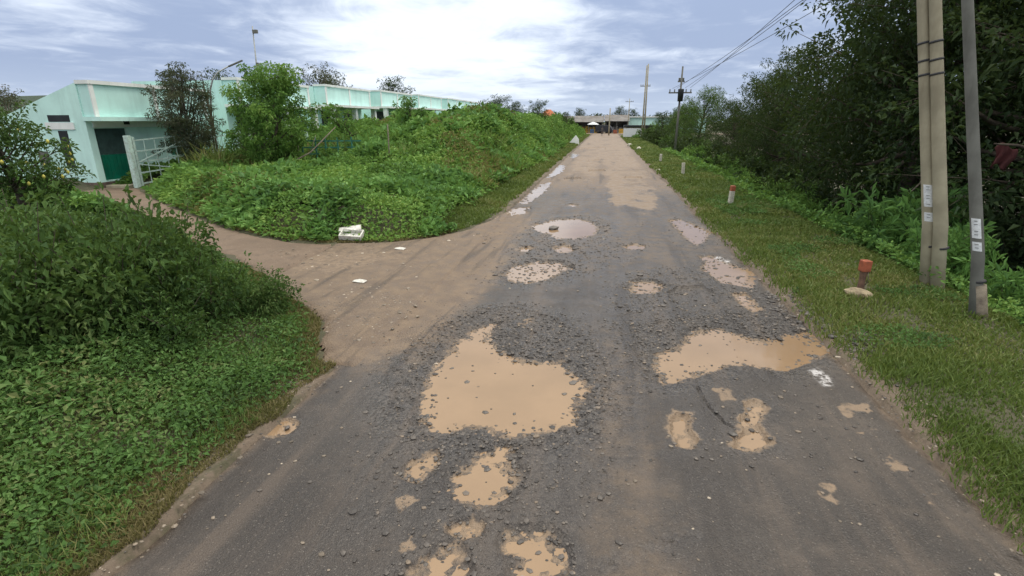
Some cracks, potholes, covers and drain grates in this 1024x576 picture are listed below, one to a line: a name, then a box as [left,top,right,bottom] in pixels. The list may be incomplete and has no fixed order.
pothole [705,388,795,460]
crack [696,386,734,428]
pothole [360,301,651,470]
pothole [646,405,715,463]
pothole [619,276,670,301]
pothole [471,507,623,576]
pothole [263,418,301,438]
pothole [692,254,763,289]
pothole [608,306,876,419]
pothole [417,434,547,537]
pothole [390,432,468,499]
pothole [666,217,715,246]
